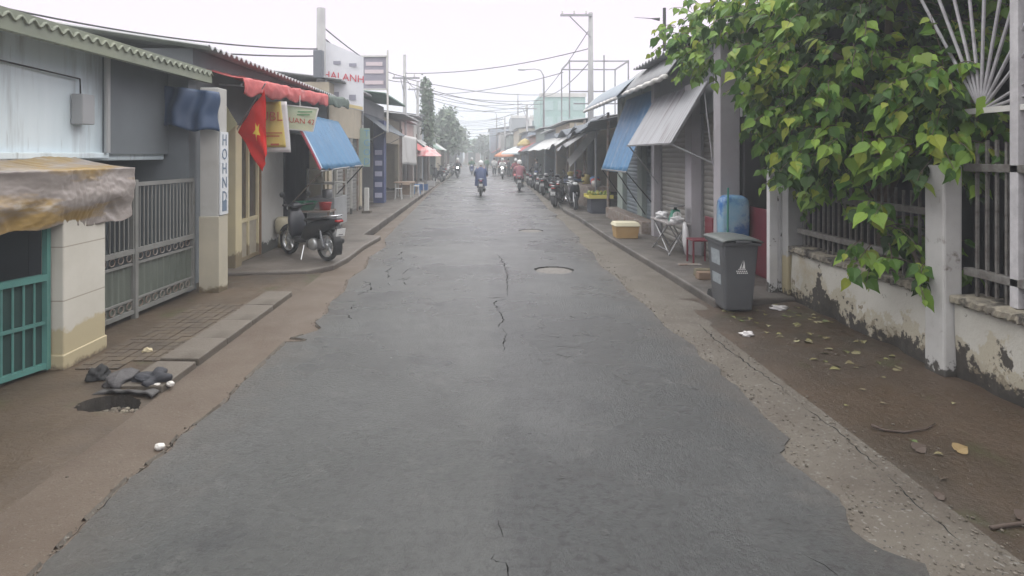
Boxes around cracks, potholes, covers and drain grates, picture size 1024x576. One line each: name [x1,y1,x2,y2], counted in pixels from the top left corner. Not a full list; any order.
crack [488,253,509,349]
pothole [73,388,160,413]
manhole cover [534,266,574,274]
crack [348,252,411,319]
